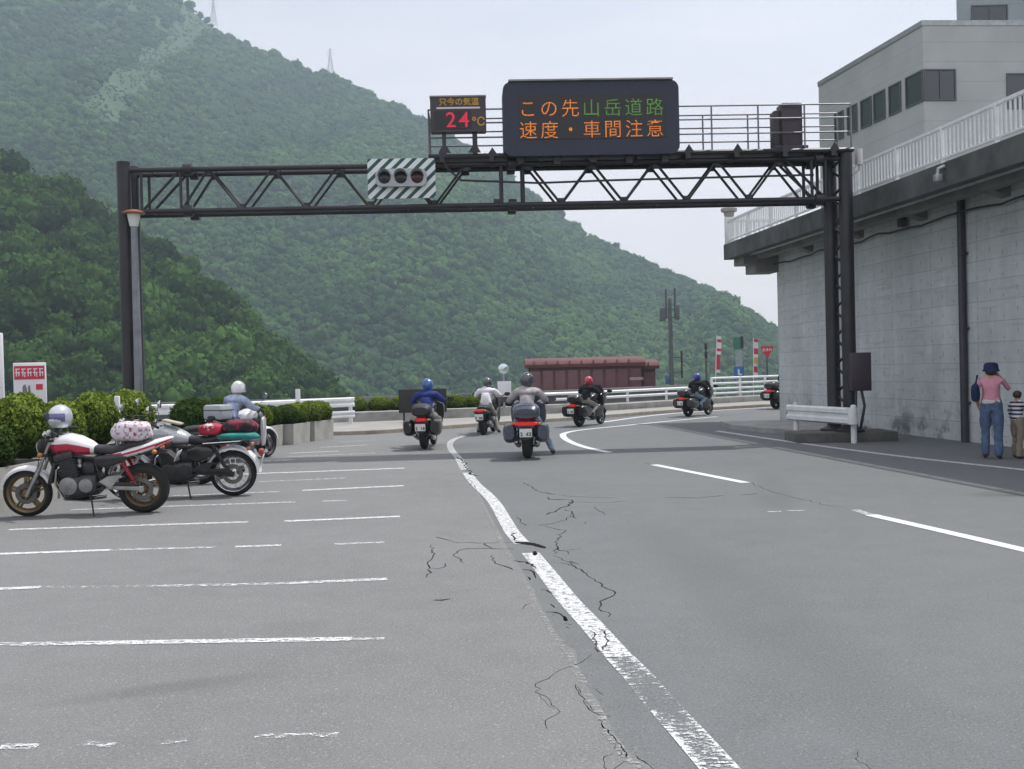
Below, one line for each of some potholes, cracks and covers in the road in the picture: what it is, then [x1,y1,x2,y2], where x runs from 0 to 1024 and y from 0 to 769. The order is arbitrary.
crack [524,483,653,769]
crack [425,517,571,629]
